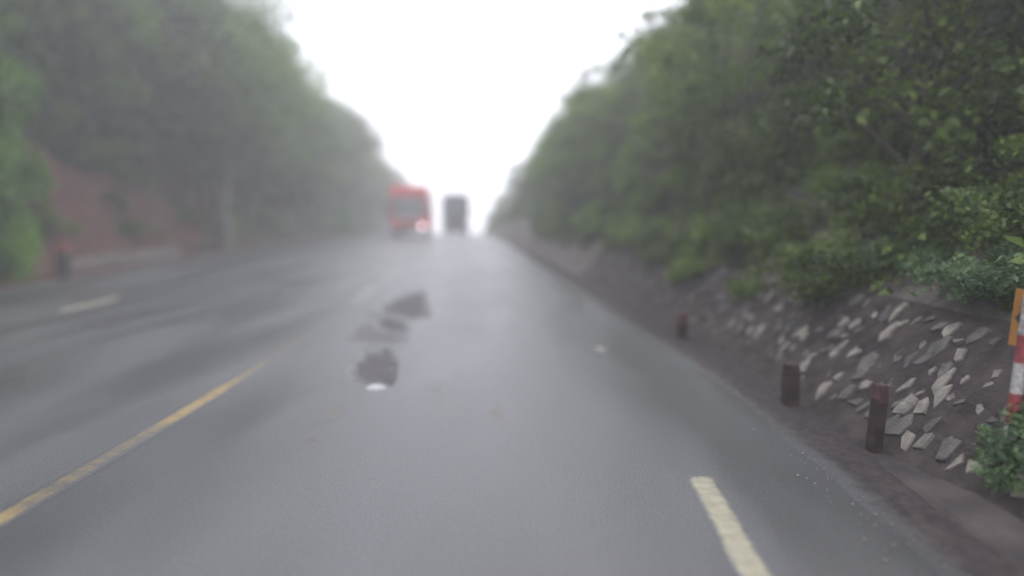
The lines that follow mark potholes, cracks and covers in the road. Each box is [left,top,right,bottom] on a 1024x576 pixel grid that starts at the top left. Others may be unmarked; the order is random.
pothole [348,347,399,386]
pothole [377,289,431,322]
pothole [373,315,411,333]
pothole [343,322,410,346]
